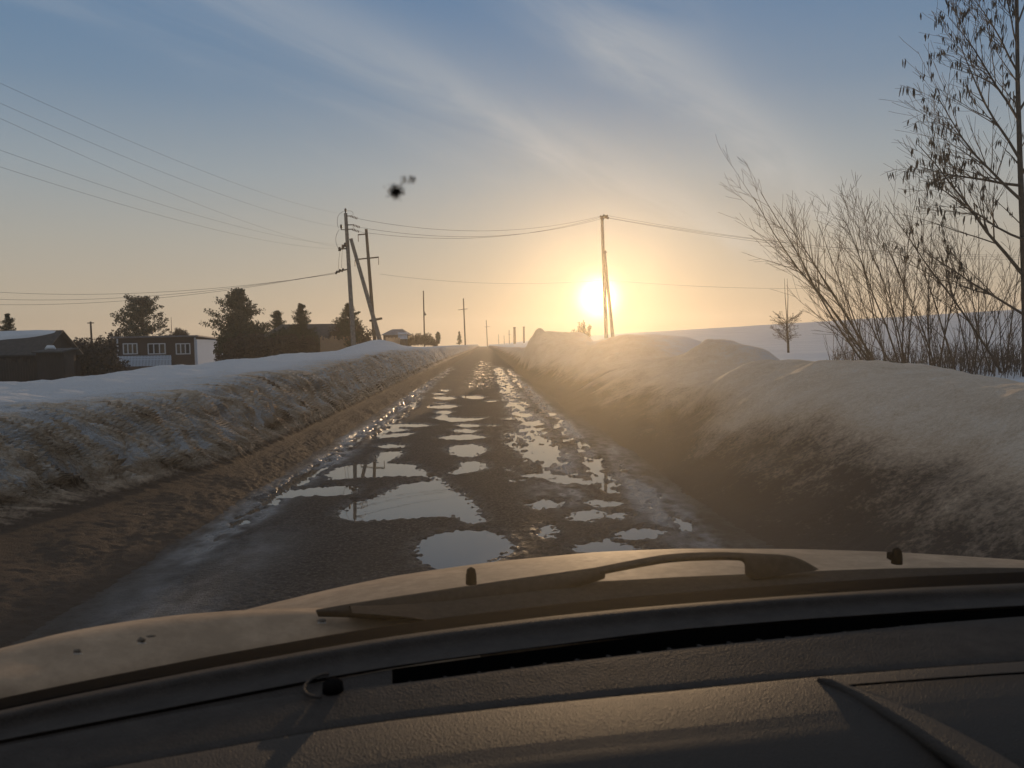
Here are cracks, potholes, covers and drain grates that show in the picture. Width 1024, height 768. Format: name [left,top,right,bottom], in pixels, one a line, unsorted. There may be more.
pothole [518,495,572,510]
pothole [514,452,559,460]
pothole [438,457,494,475]
pothole [316,460,435,481]
pothole [574,478,607,486]
pothole [247,481,367,502]
pothole [441,441,493,458]
pothole [556,505,617,523]
pothole [539,474,596,485]
pothole [513,470,571,479]
pothole [403,524,528,571]
pothole [599,521,680,542]
